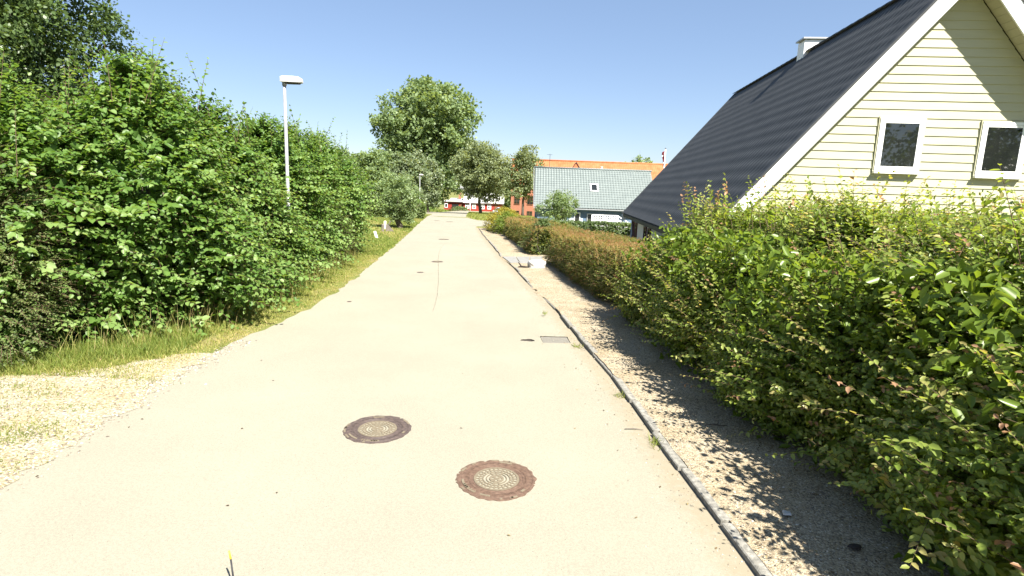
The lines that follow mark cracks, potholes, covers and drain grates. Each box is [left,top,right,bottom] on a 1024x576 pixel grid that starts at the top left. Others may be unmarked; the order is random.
manhole cover [342,416,412,444]
manhole cover [455,460,537,501]
